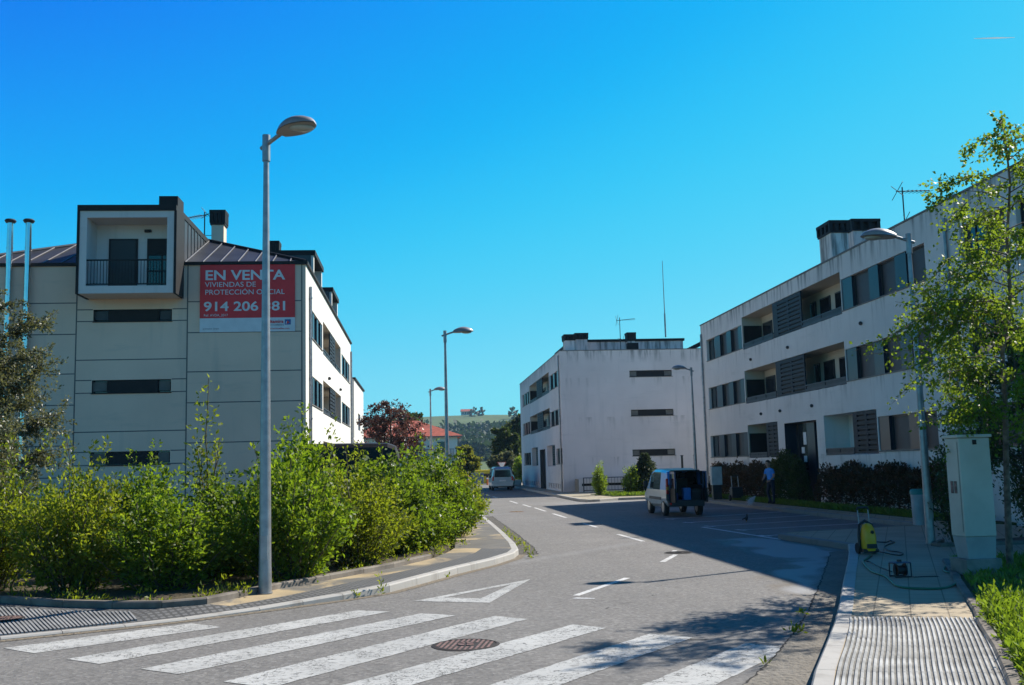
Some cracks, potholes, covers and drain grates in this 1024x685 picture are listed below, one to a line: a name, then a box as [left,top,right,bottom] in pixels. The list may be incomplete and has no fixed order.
manhole cover [431,639,500,651]
